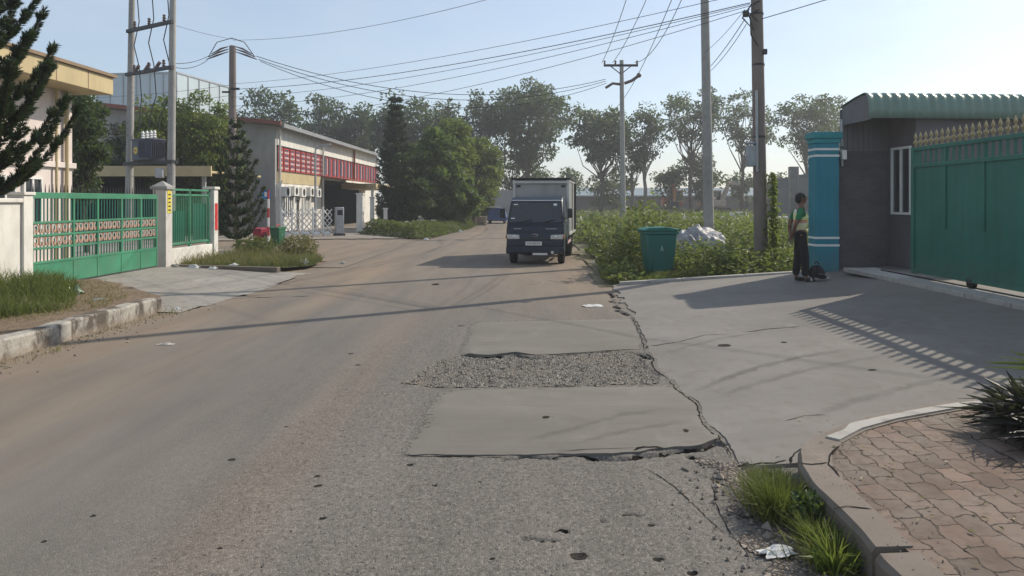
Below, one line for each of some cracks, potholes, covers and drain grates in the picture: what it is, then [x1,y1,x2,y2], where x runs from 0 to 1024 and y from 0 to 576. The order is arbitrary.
pothole [401,349,660,388]
crack [516,445,756,562]
crack [640,334,716,360]
